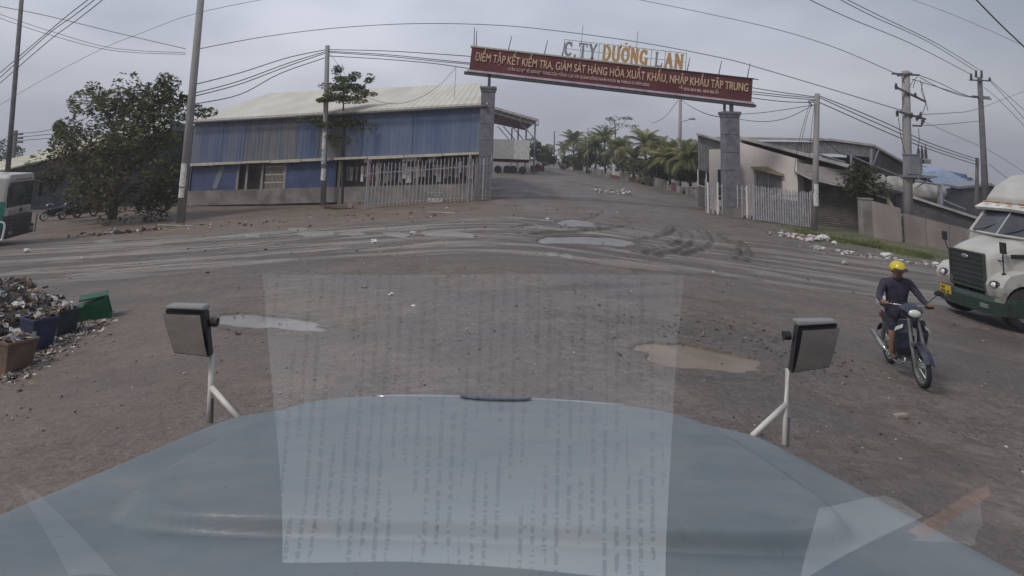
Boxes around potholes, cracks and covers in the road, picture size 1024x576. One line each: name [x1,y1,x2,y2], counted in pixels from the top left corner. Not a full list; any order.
pothole [550,218,602,228]
pothole [209,309,345,336]
pothole [528,235,644,247]
pothole [608,337,785,381]
